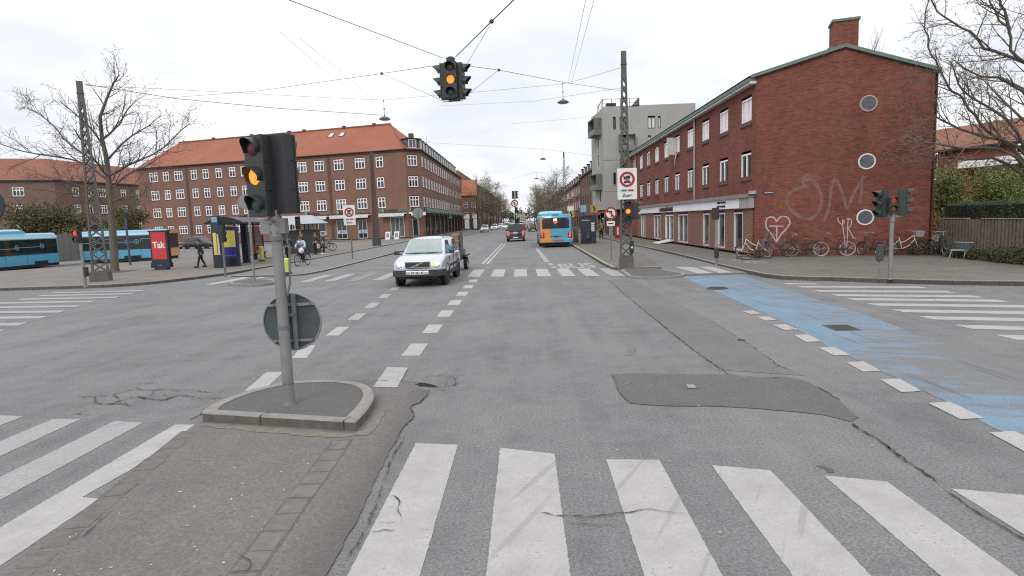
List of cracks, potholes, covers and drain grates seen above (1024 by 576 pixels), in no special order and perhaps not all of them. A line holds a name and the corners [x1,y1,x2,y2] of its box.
crack [345,372,463,562]
crack [65,382,220,421]
crack [535,509,686,525]
